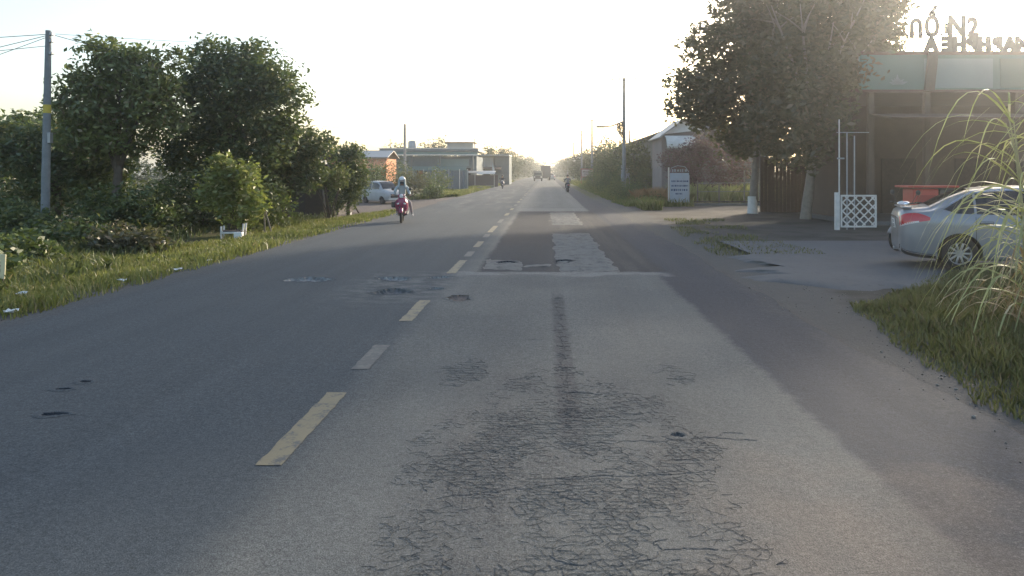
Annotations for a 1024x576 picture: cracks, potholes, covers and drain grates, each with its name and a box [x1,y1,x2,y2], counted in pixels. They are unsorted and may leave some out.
crack [360,366,786,576]
pothole [367,287,418,295]
pothole [32,410,78,418]
pothole [441,294,474,302]
pothole [662,429,694,440]
crack [439,358,489,385]
